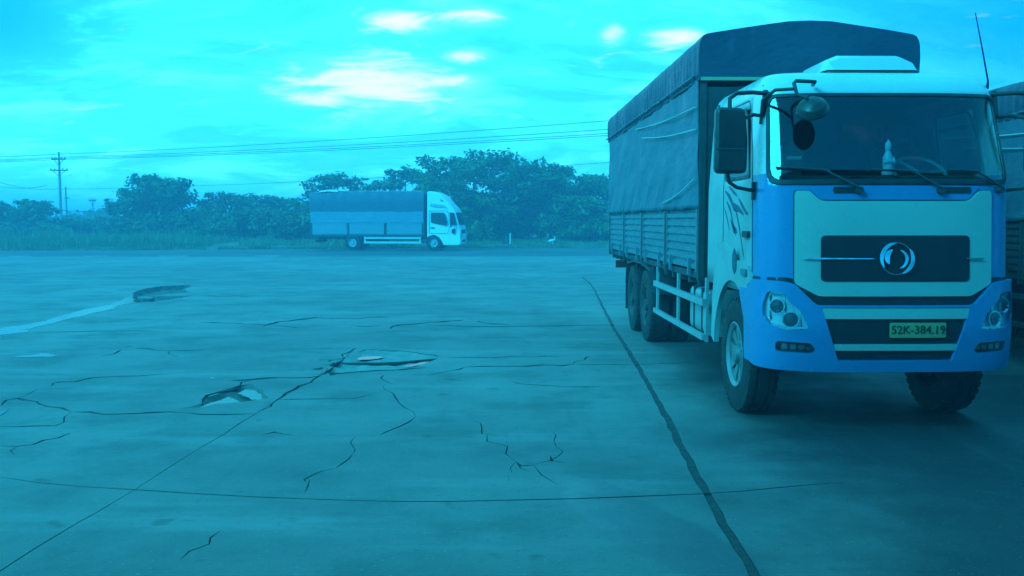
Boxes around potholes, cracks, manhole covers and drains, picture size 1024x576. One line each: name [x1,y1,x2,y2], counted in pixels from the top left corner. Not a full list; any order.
pothole [132,285,195,303]
crack [0,348,627,454]
crack [201,317,461,329]
crack [303,437,356,492]
crack [472,420,563,484]
pothole [183,384,268,409]
pothole [322,349,439,376]
